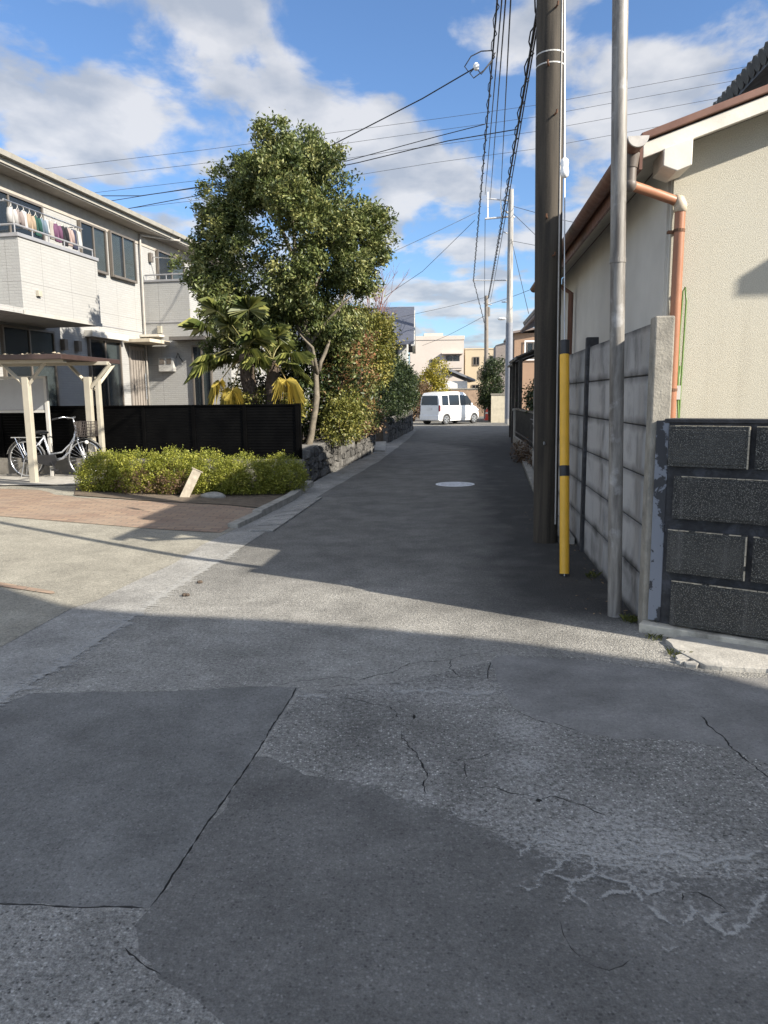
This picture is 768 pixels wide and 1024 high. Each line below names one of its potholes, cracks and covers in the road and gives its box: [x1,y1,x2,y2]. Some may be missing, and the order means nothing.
crack [560,922,634,971]
crack [454,752,612,818]
crack [509,826,767,951]
crack [284,653,494,793]
crack [701,716,768,777]
